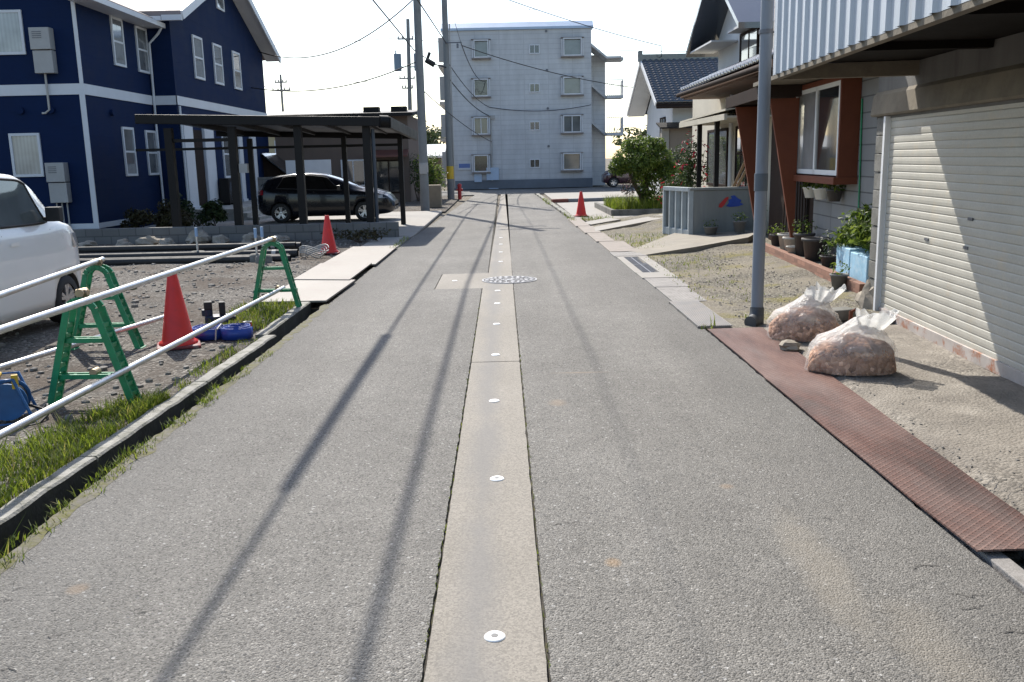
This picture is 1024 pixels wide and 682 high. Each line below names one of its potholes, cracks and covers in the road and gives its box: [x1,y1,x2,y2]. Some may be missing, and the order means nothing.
drain grate [615,256,678,279]
manhole cover [482,276,537,284]
